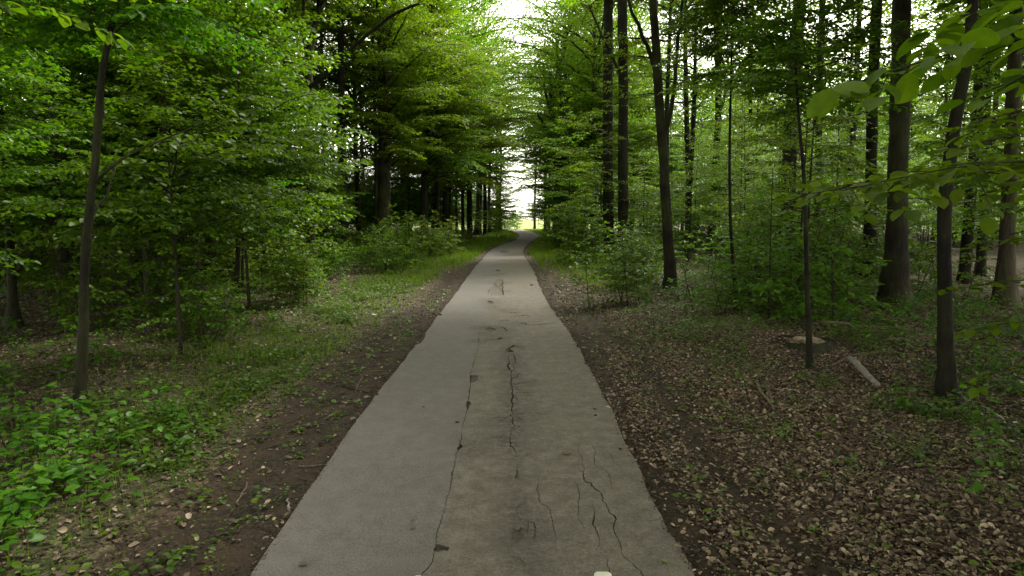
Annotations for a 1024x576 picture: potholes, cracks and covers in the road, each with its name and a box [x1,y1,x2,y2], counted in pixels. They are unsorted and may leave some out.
pothole [491,279,504,295]
crack [486,312,557,551]
crack [575,444,644,576]
